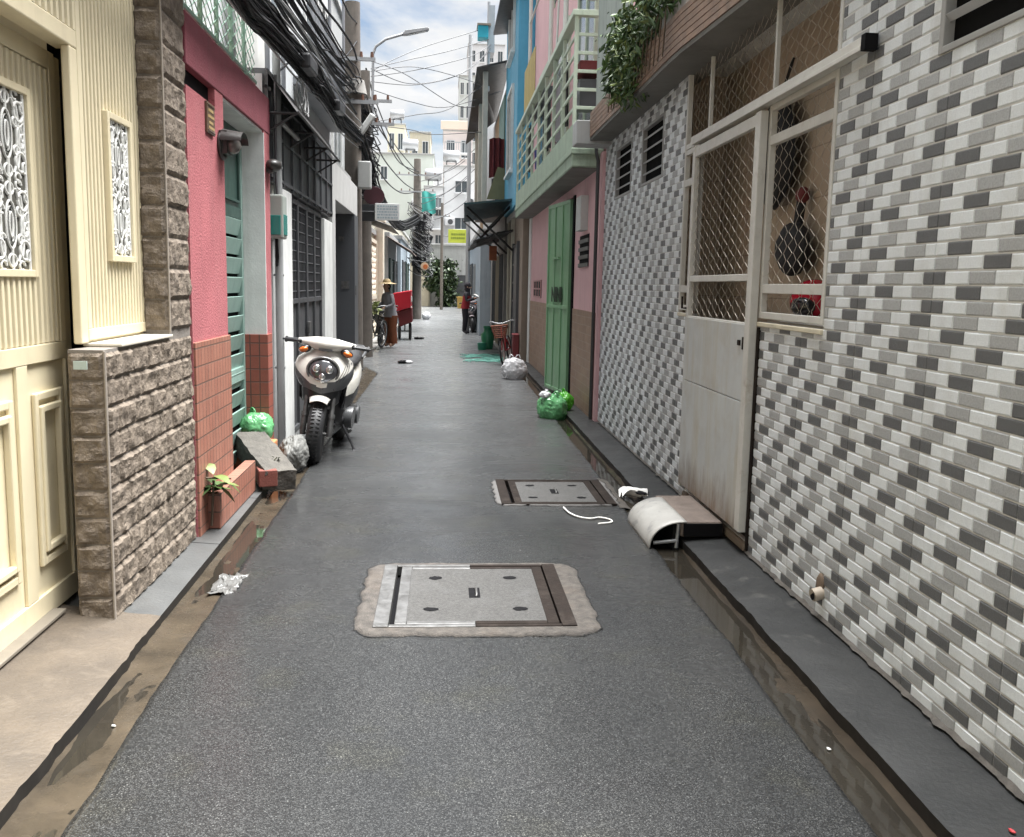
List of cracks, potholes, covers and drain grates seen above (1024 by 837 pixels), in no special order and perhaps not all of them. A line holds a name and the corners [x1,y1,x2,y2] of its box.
manhole cover [353,563,603,637]
manhole cover [490,479,618,507]
